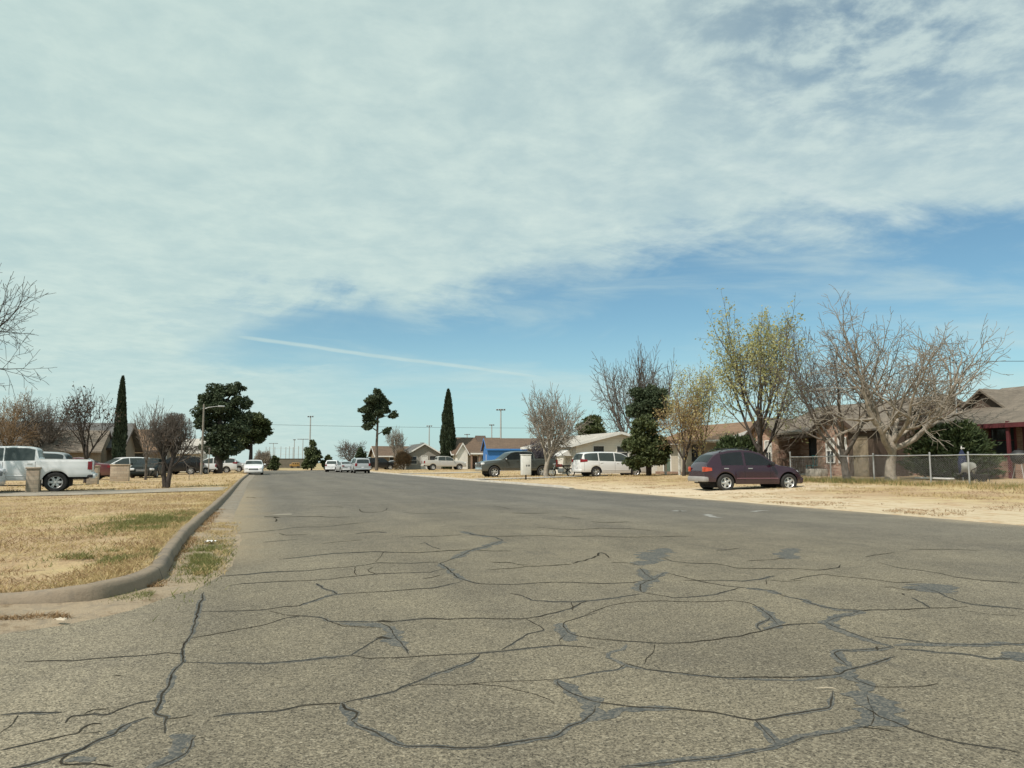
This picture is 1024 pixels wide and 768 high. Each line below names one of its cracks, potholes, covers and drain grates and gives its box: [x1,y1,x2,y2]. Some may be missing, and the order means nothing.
crack [0,508,1020,768]
